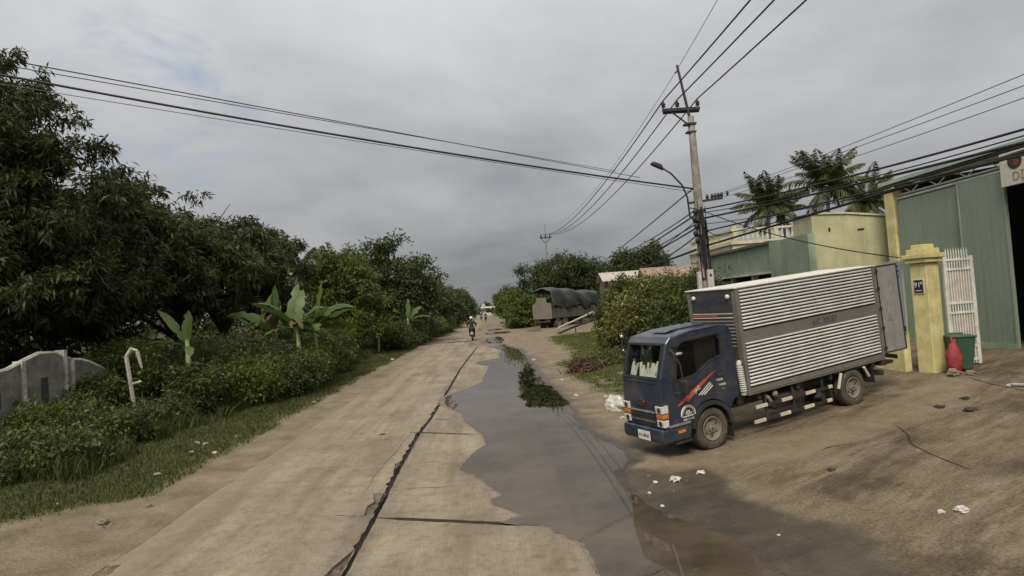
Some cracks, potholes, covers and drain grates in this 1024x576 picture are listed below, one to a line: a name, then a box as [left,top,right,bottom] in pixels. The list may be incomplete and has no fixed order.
crack [896,425,970,470]
